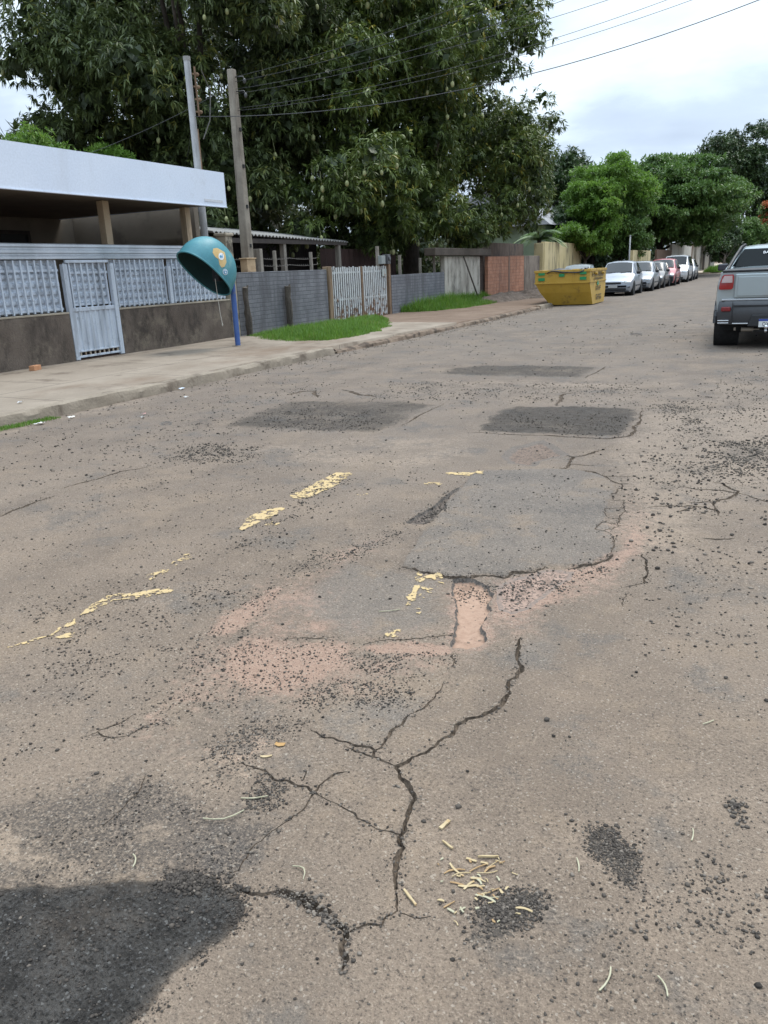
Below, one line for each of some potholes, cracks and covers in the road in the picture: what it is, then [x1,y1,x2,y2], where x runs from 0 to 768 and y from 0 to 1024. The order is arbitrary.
crack [648,482,767,517]
pothole [406,486,461,525]
crack [0,467,146,517]
pothole [450,578,494,649]
crack [224,634,525,971]
